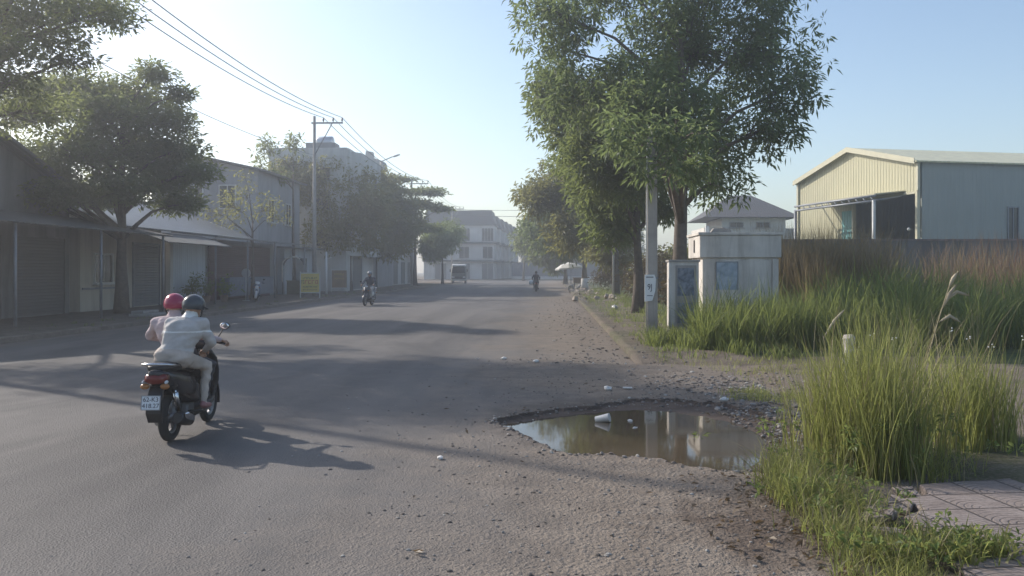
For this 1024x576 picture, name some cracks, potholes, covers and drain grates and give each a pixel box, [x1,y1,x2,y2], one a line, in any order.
pothole [491,398,805,471]
